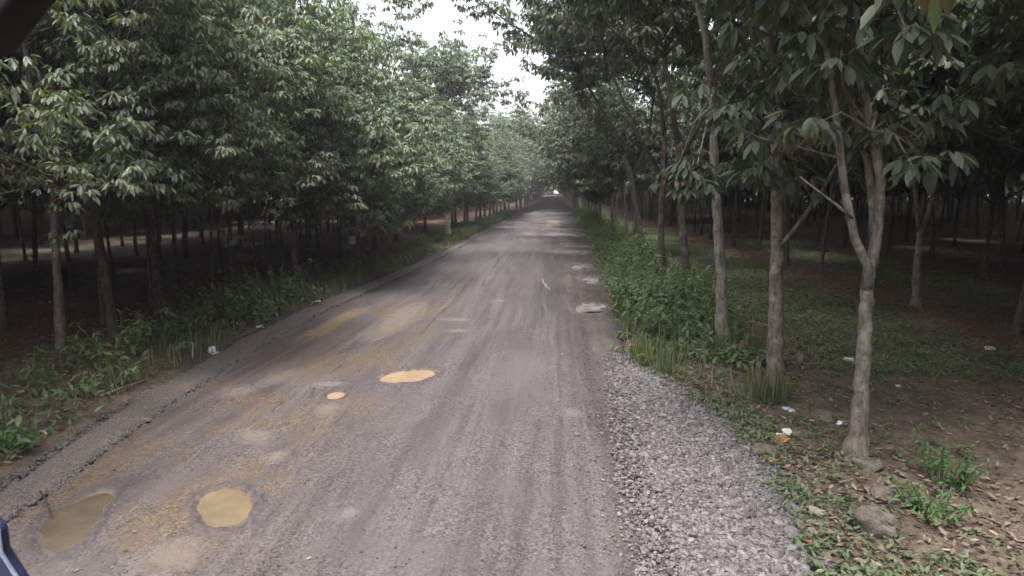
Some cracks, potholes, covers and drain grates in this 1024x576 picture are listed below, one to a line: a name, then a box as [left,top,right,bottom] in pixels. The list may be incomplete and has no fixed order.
pothole [365,365,447,387]
pothole [177,480,270,540]
pothole [317,389,354,402]
pothole [12,476,134,563]
